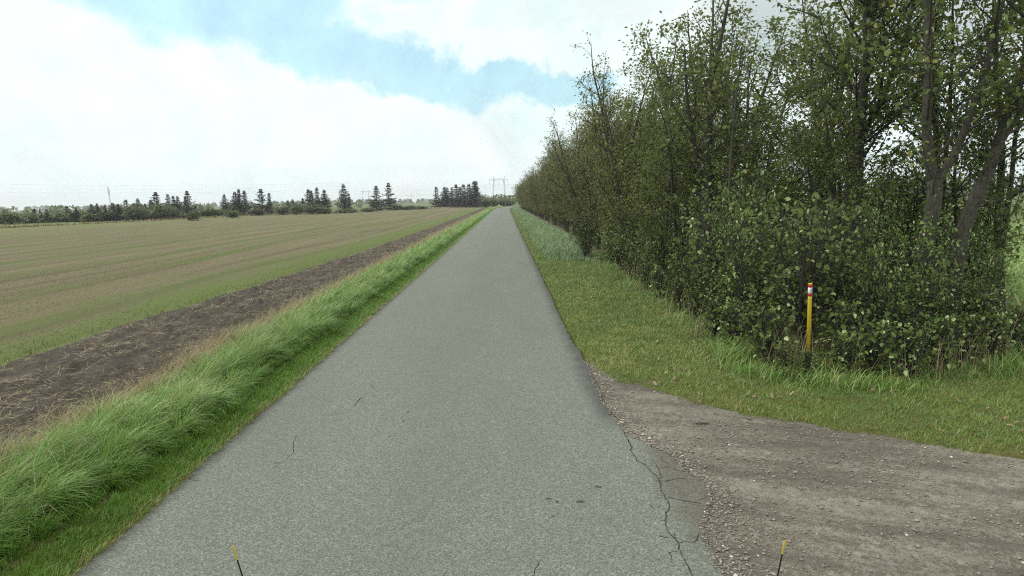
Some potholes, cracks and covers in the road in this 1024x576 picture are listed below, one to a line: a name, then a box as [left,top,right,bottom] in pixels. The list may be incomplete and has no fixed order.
crack [620,428,706,576]
